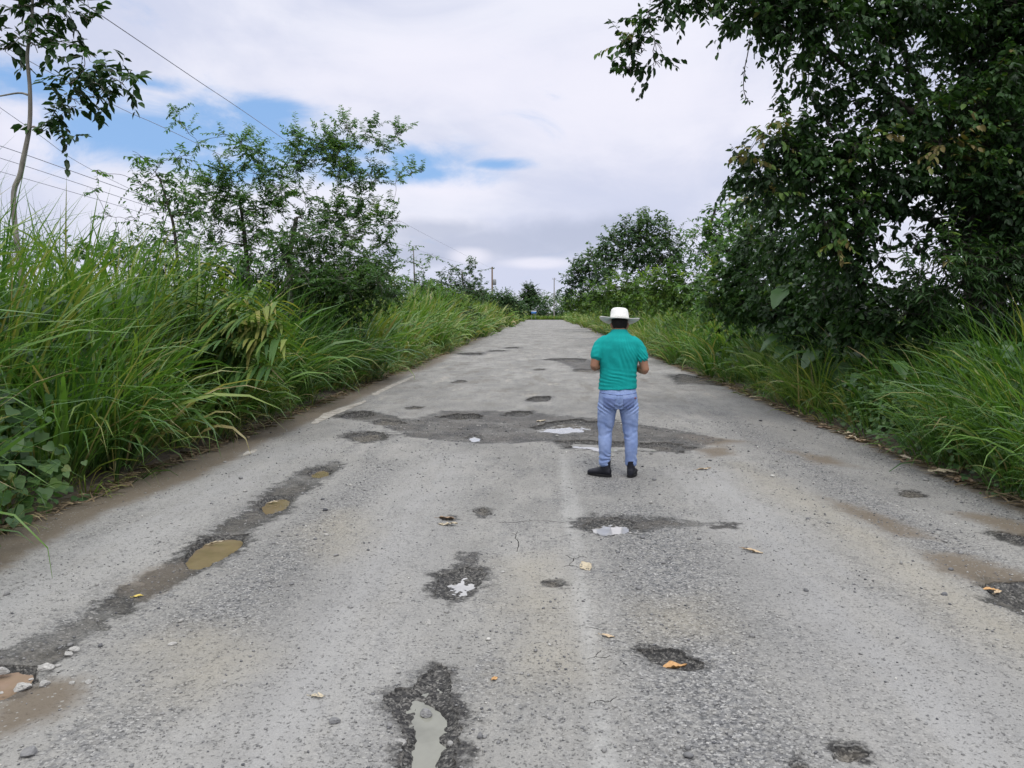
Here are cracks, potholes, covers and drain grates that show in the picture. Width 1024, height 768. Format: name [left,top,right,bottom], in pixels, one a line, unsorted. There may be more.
pothole [472,506,493,517]
pothole [554,440,698,453]
pothole [637,647,705,671]
pothole [181,533,250,570]
pothole [255,495,296,515]
pothole [830,744,870,763]
pothole [582,517,639,537]
pothole [434,567,488,601]
pothole [383,663,463,768]
pothole [540,578,564,588]
pothole [528,419,598,434]
